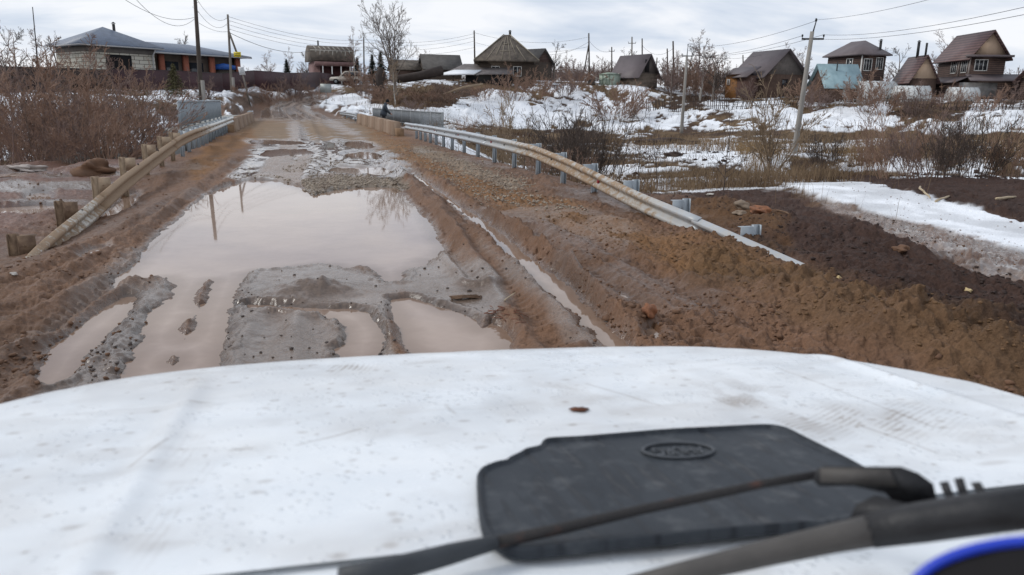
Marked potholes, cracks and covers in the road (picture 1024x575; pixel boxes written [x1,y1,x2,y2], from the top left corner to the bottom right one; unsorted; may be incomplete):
pothole [95,176,454,383]
pothole [379,291,526,354]
pothole [323,162,400,175]
pothole [250,146,324,157]
pothole [340,139,384,149]
pothole [336,149,391,159]
pothole [240,137,311,145]
pothole [18,284,148,385]
pothole [319,139,343,150]
